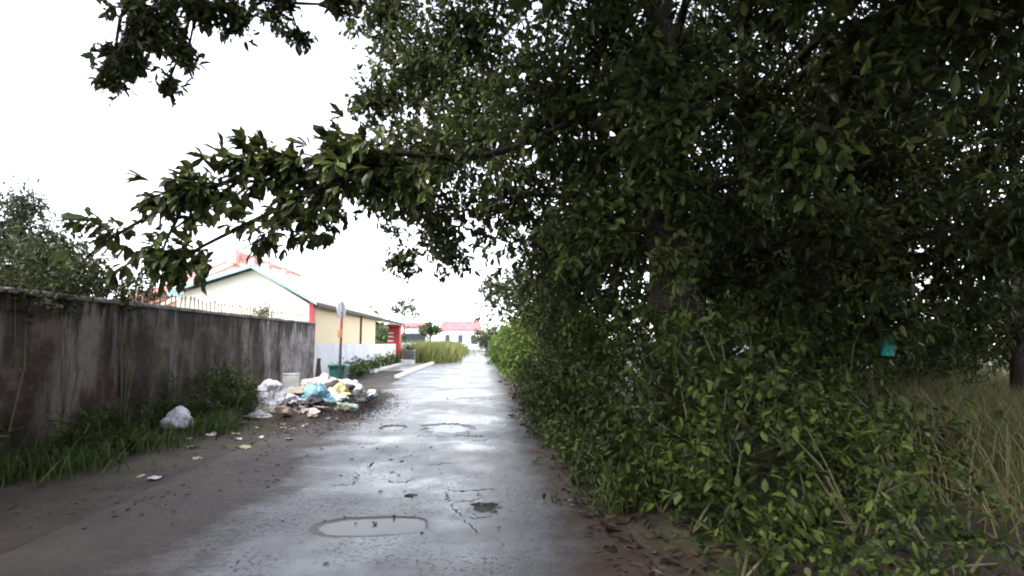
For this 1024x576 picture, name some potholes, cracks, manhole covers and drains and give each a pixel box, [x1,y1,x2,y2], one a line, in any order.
crack [444,489,497,533]
pothole [418,422,479,434]
pothole [309,514,428,538]
pothole [470,502,503,514]
